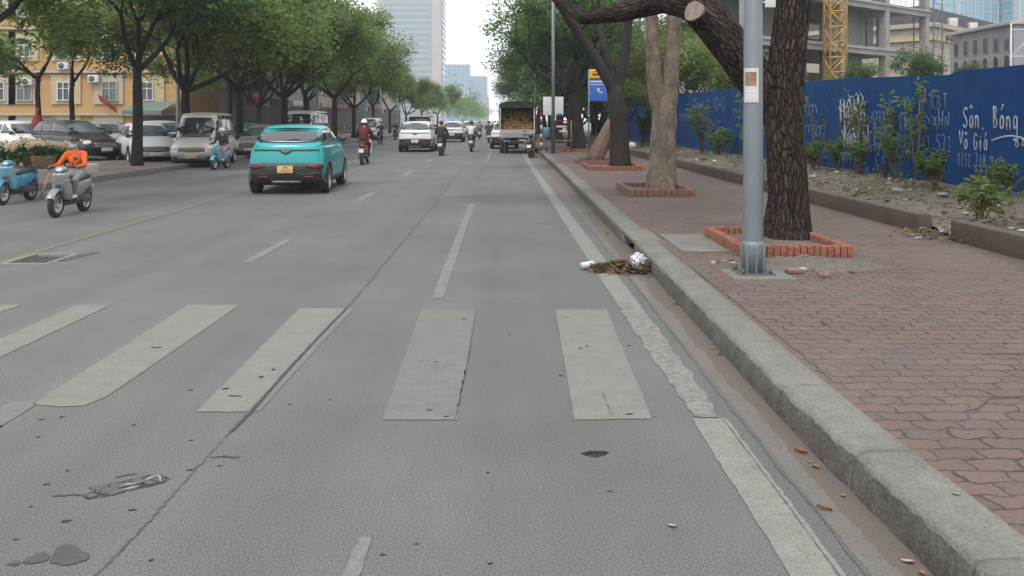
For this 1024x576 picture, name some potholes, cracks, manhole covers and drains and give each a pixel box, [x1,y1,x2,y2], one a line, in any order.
crack [456,316,475,415]
pothole [82,474,171,500]
